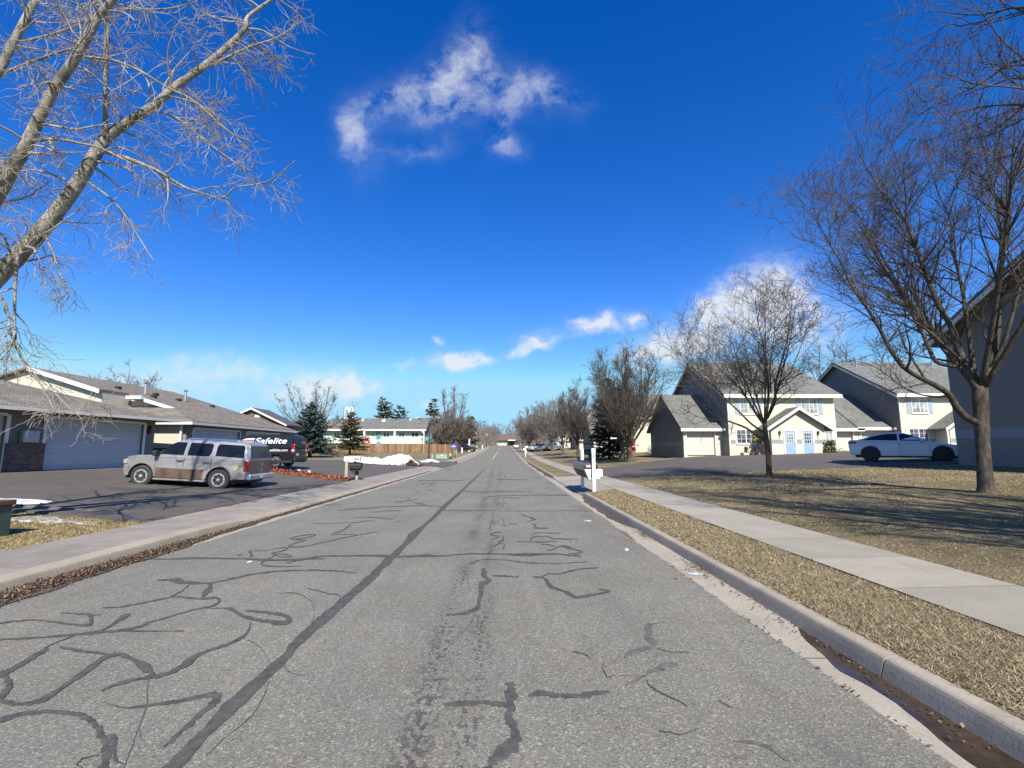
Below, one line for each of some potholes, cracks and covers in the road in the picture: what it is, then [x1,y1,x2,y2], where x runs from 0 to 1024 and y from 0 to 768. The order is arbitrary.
crack [123,679,150,768]
crack [208,665,305,754]
crack [338,469,570,549]
